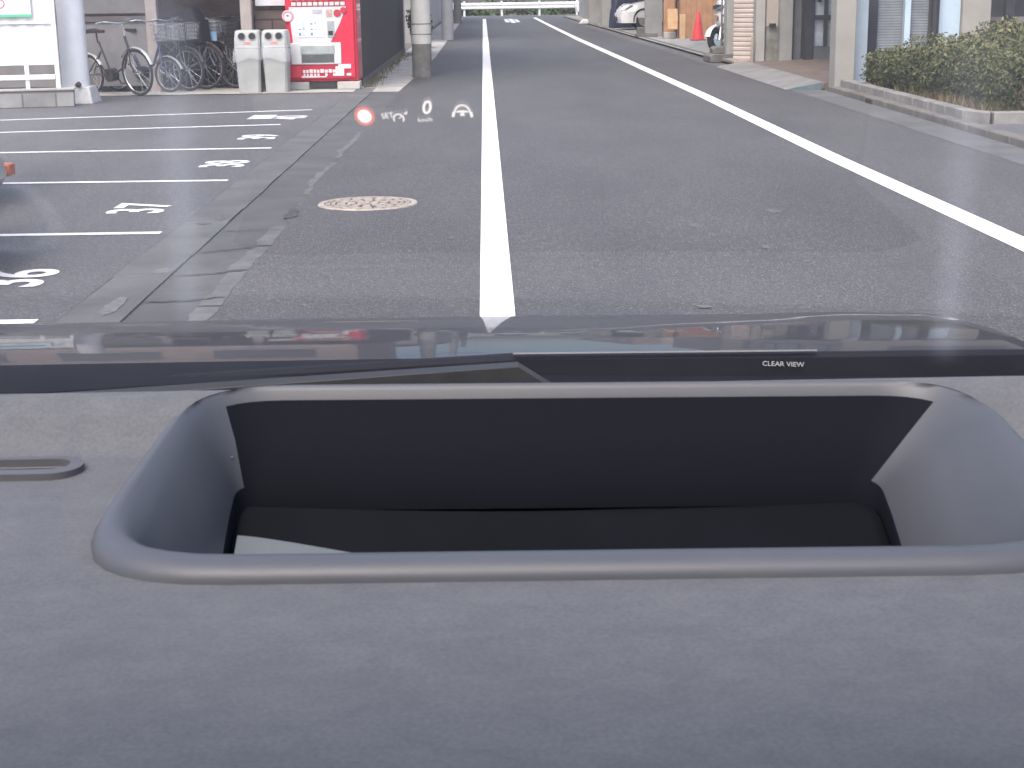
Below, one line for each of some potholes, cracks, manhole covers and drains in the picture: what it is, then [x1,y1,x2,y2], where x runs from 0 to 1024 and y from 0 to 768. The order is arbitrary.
manhole cover [318,196,418,211]
